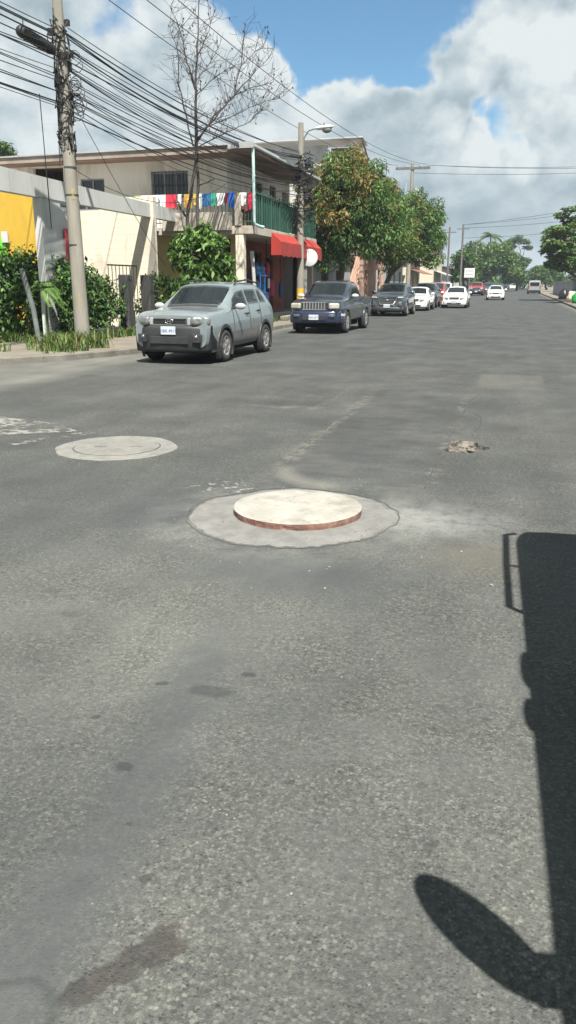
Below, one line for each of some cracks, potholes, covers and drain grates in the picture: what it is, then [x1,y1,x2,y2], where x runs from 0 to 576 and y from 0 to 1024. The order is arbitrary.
pothole [443,440,490,453]
manhole cover [184,487,400,549]
crack [451,393,484,437]
manhole cover [55,436,178,461]
